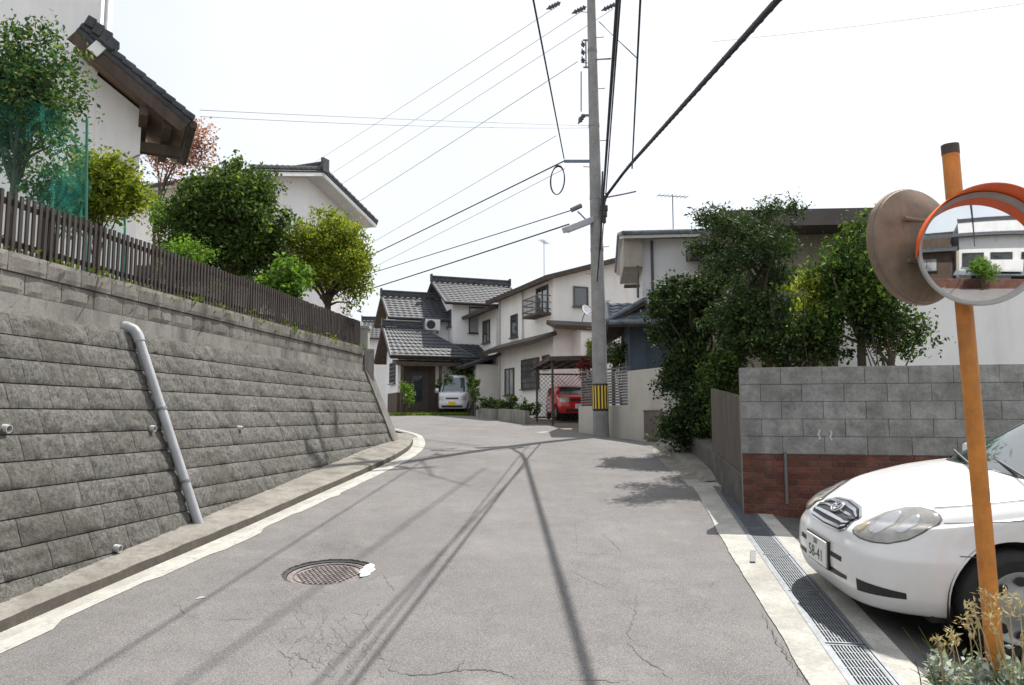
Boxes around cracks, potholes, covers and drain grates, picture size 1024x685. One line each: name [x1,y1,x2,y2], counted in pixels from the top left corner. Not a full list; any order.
crack [759,608,808,680]
drain grate [745,528,789,555]
drain grate [826,644,898,685]
crack [277,602,395,677]
crack [389,660,514,678]
drain grate [789,591,864,645]
manhole cover [282,560,376,585]
crack [627,594,673,679]
drain grate [764,555,820,592]
